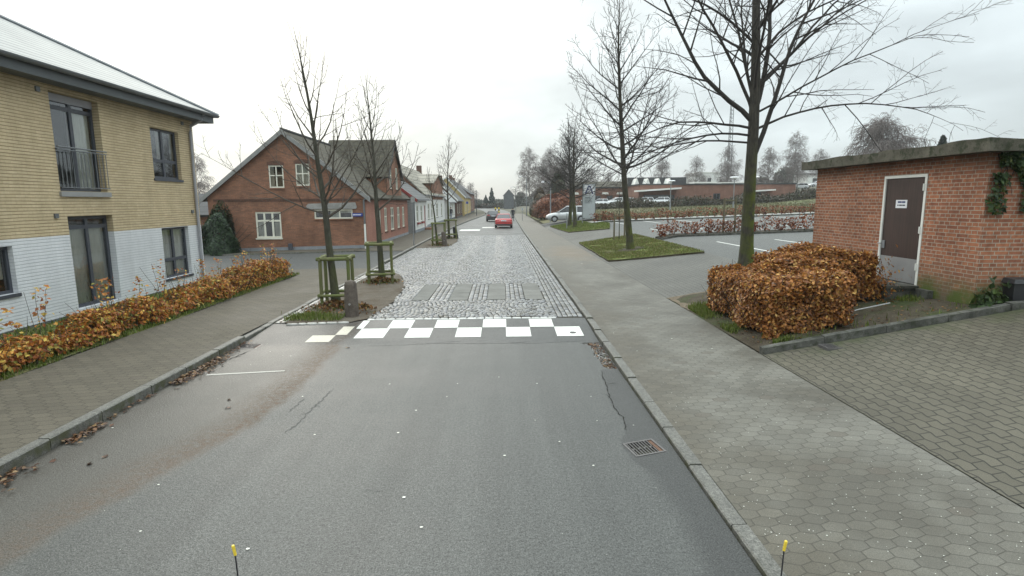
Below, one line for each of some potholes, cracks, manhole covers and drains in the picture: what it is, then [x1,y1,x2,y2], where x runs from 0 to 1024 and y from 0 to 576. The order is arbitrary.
crack [285,390,332,432]
drain grate [622,438,666,457]
